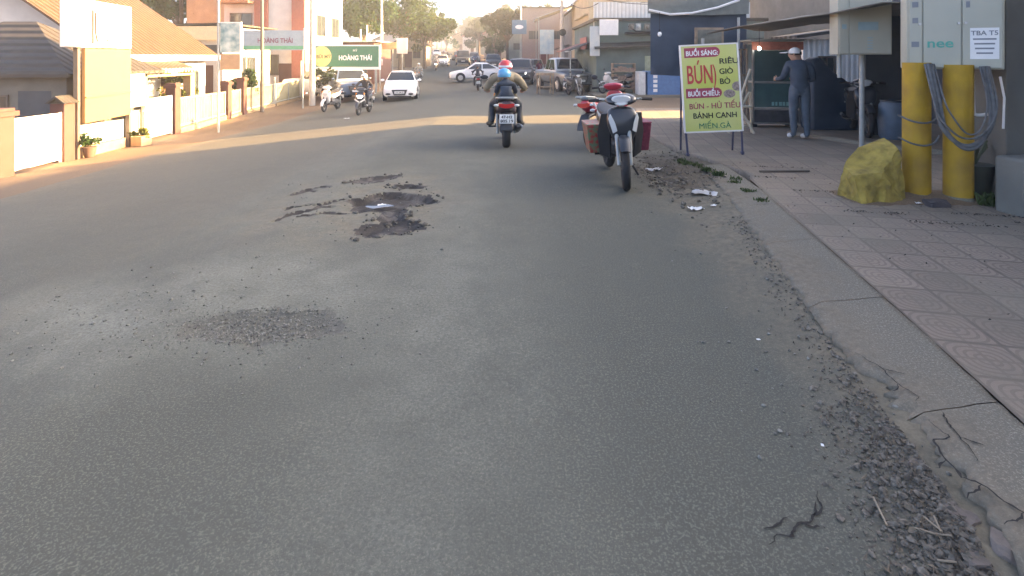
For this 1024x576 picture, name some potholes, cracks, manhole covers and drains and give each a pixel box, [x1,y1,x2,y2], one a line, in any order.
pothole [345,192,440,223]
pothole [341,175,402,184]
pothole [353,220,427,238]
